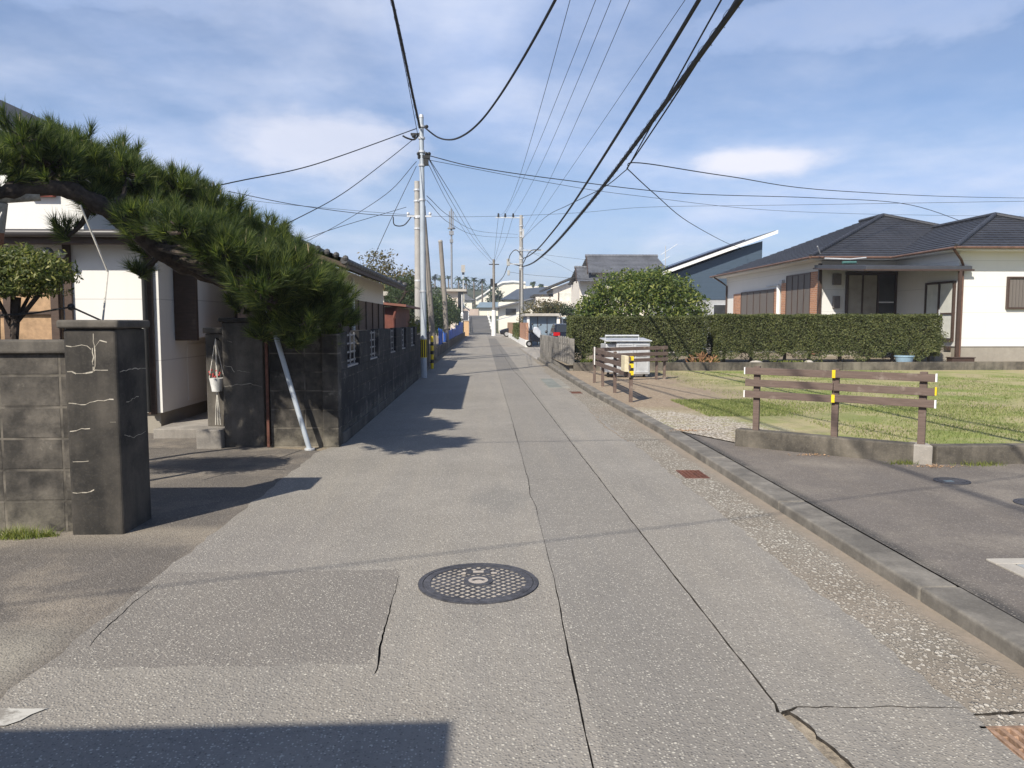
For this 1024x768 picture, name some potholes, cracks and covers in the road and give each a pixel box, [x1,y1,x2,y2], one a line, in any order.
manhole cover [418,563,538,605]
drain grate [676,470,710,478]
drain grate [980,725,1024,760]
crack [499,348,954,716]
utility cover [540,378,570,388]
manhole cover [933,477,971,485]
